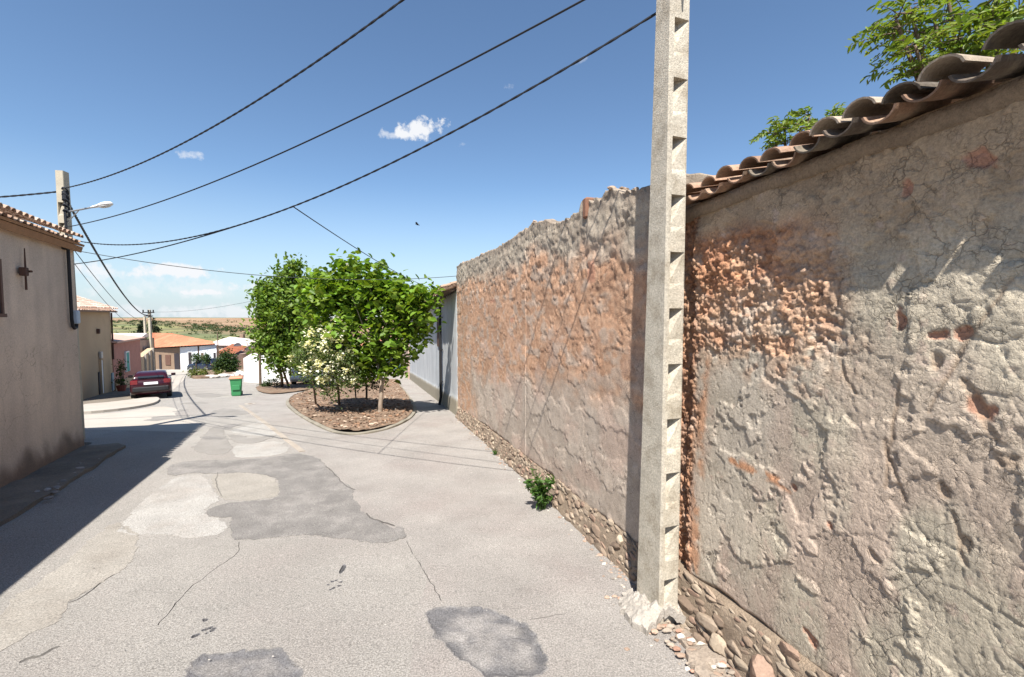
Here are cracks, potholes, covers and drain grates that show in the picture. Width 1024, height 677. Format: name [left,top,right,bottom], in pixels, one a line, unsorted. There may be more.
crack [19,646,60,663]
crack [366,513,442,602]
crack [158,545,240,625]
